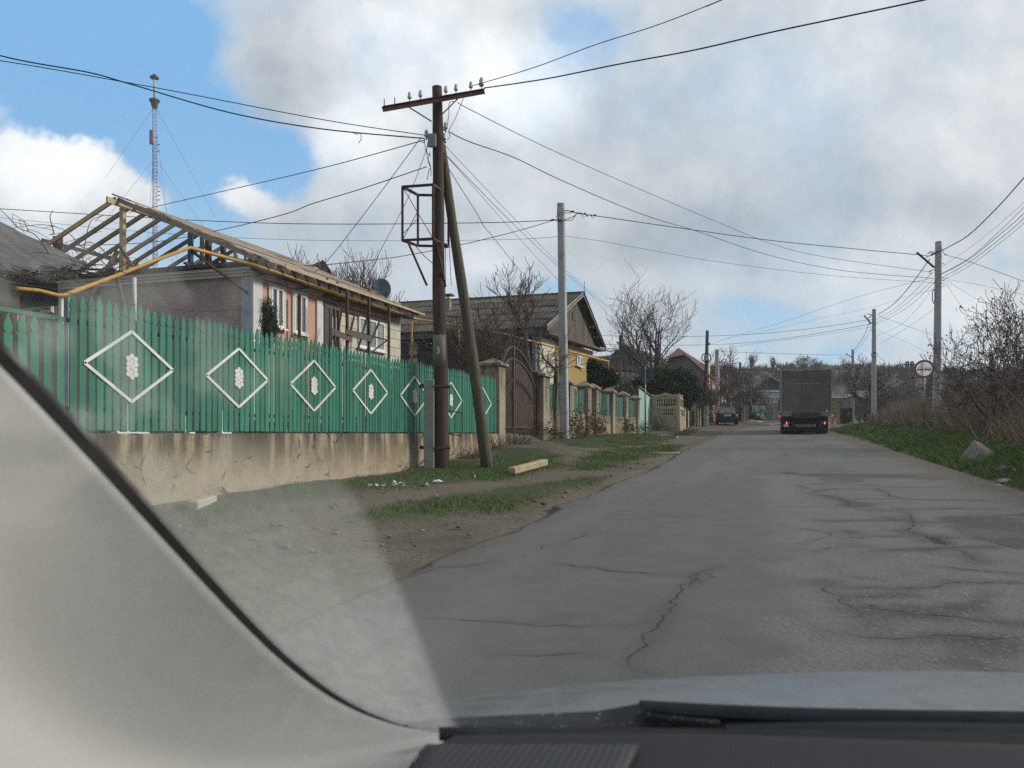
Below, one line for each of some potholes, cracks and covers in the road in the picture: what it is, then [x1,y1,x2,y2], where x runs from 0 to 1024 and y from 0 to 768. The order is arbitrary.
crack [822,567,1022,639]
crack [788,473,1010,561]
crack [628,567,724,668]
